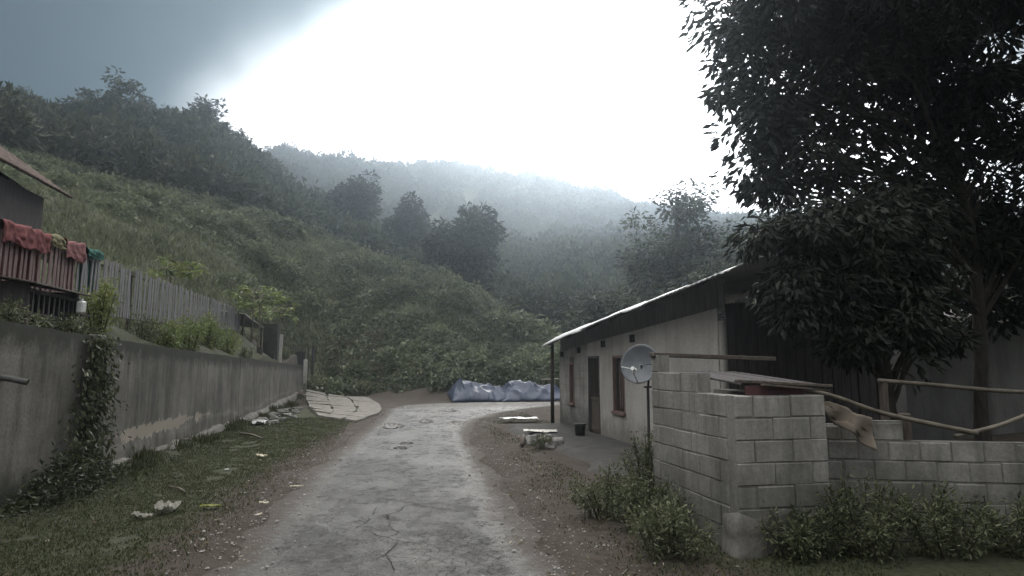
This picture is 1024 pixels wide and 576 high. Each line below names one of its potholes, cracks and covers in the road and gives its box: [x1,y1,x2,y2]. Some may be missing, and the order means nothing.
crack [309,469,510,576]
